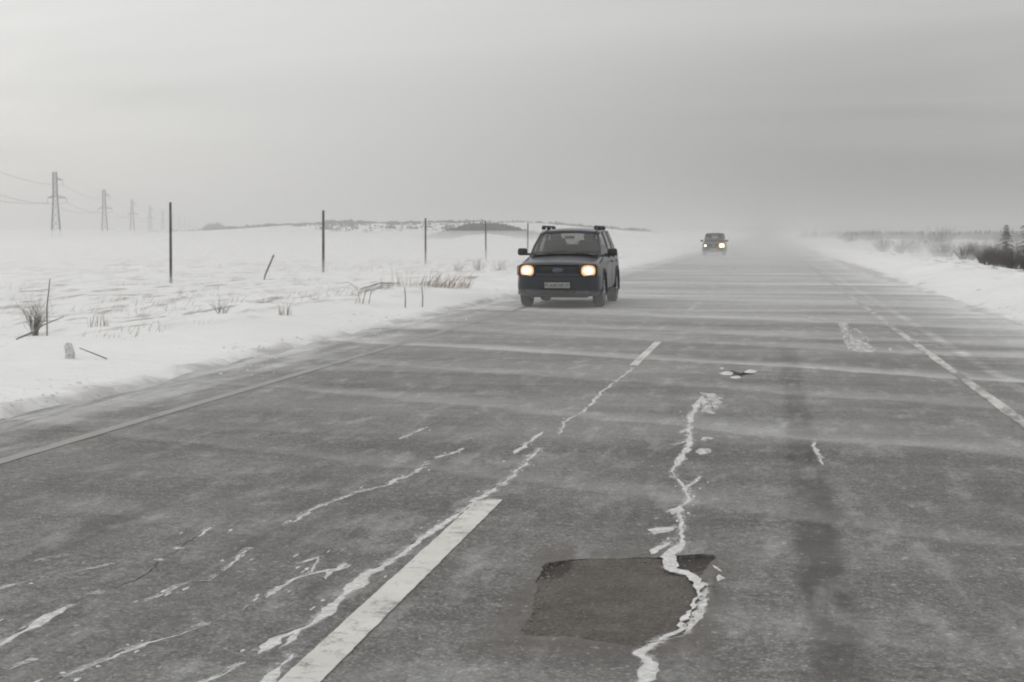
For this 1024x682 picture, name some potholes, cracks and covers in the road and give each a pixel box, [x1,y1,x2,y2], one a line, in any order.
crack [0,368,725,682]
